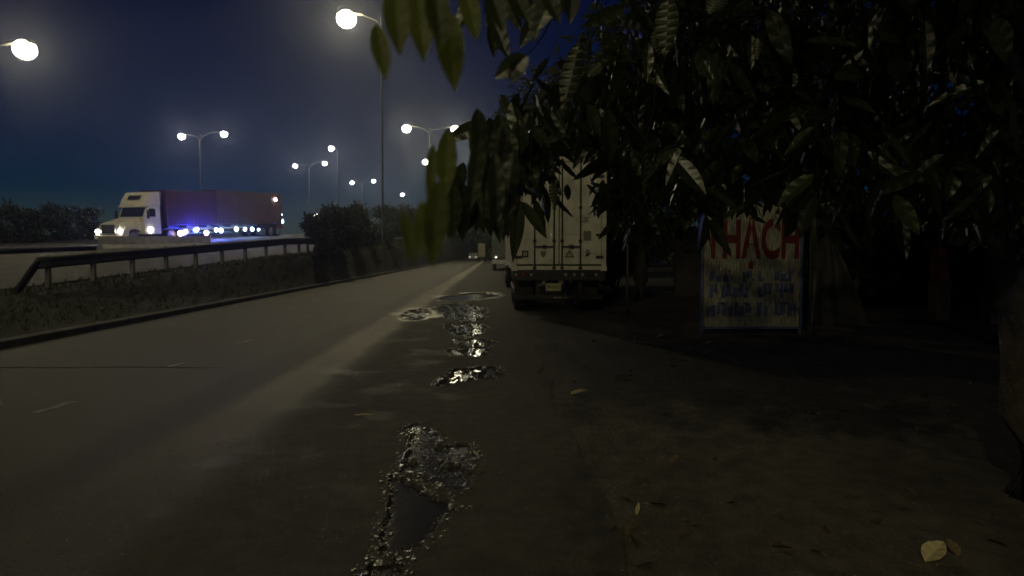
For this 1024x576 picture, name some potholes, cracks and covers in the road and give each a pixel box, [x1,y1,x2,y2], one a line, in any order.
pothole [367,469,473,558]
pothole [433,303,491,321]
pothole [443,321,489,337]
pothole [444,338,502,357]
pothole [432,292,505,301]
pothole [388,307,441,321]
pothole [390,421,488,497]
pothole [350,550,416,576]
pothole [431,365,509,388]
